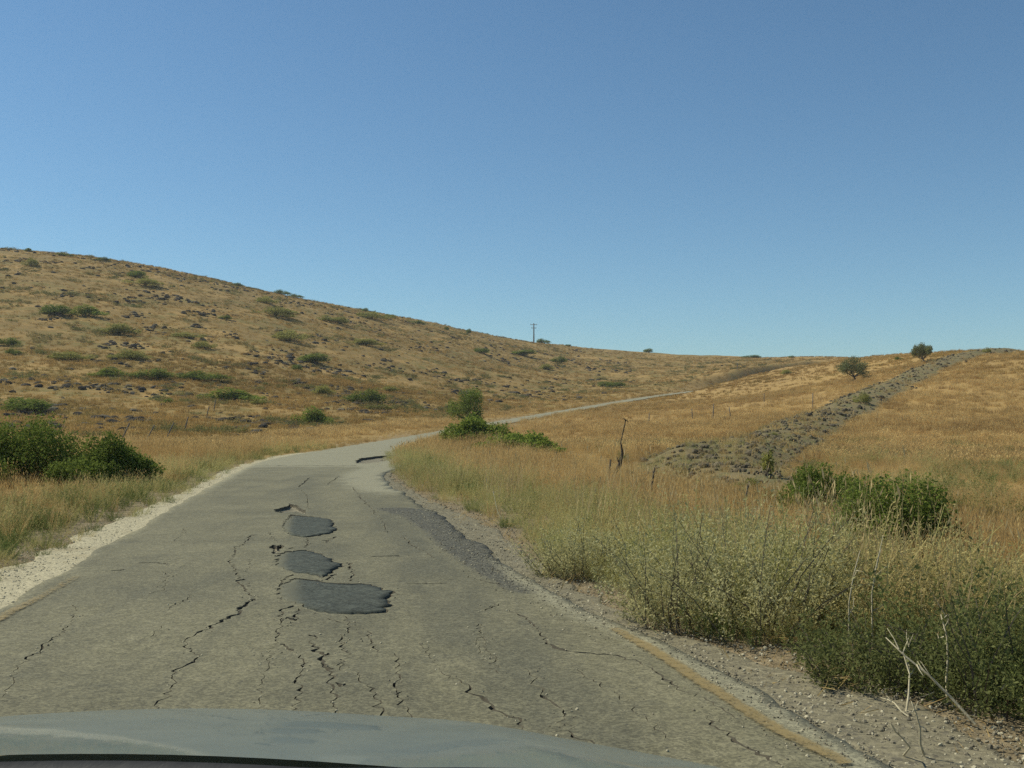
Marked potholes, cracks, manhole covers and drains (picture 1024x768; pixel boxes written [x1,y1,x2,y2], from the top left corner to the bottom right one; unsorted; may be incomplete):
crack [0,605,77,703]
crack [421,604,783,766]
crack [256,605,413,717]
pothole [355,455,390,463]
crack [154,532,335,709]
crack [280,476,435,584]
pothole [274,504,306,514]
